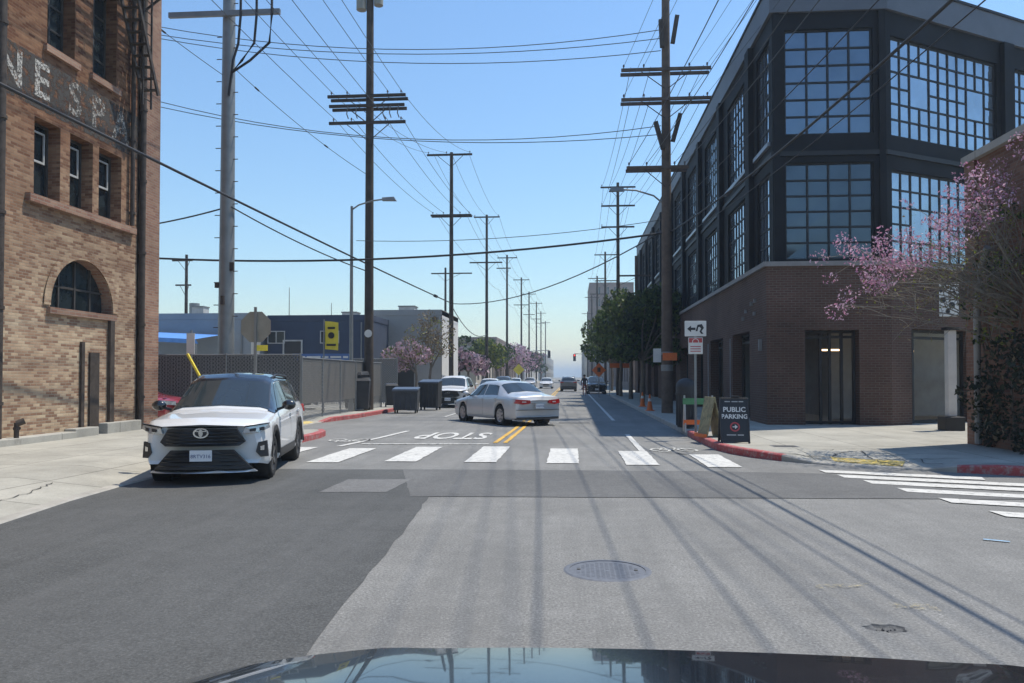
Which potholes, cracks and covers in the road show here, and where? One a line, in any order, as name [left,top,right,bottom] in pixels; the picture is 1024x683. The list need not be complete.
manhole cover [563,560,652,582]
pothole [862,624,907,633]
